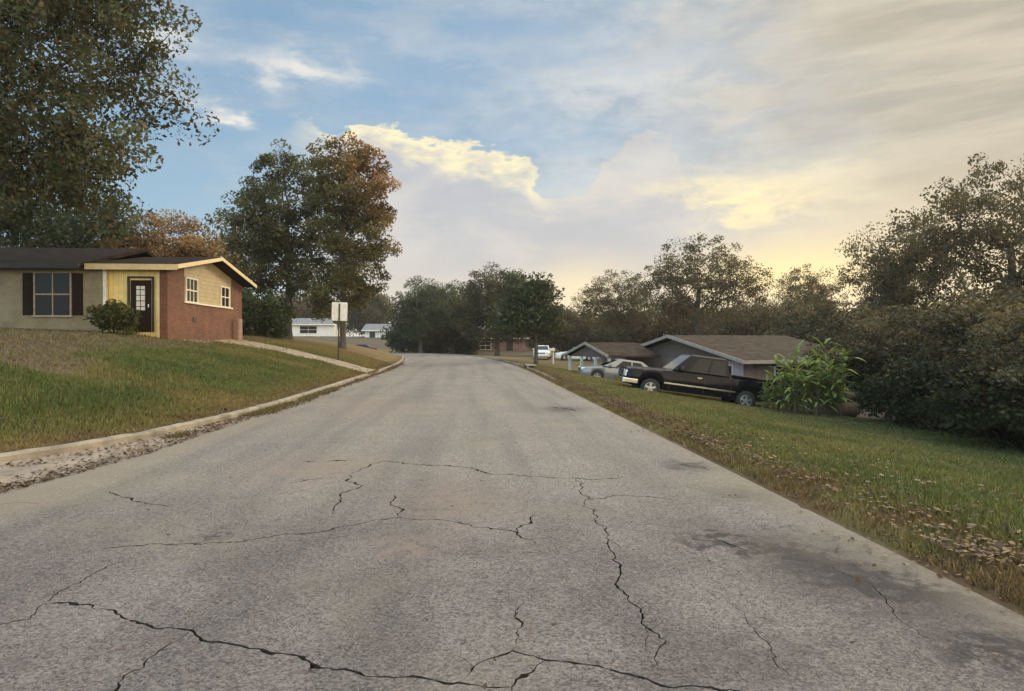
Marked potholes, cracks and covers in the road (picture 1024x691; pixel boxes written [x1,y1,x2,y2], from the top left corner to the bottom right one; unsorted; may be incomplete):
crack [722,593,817,685]
crack [833,568,925,637]
crack [0,460,739,691]
